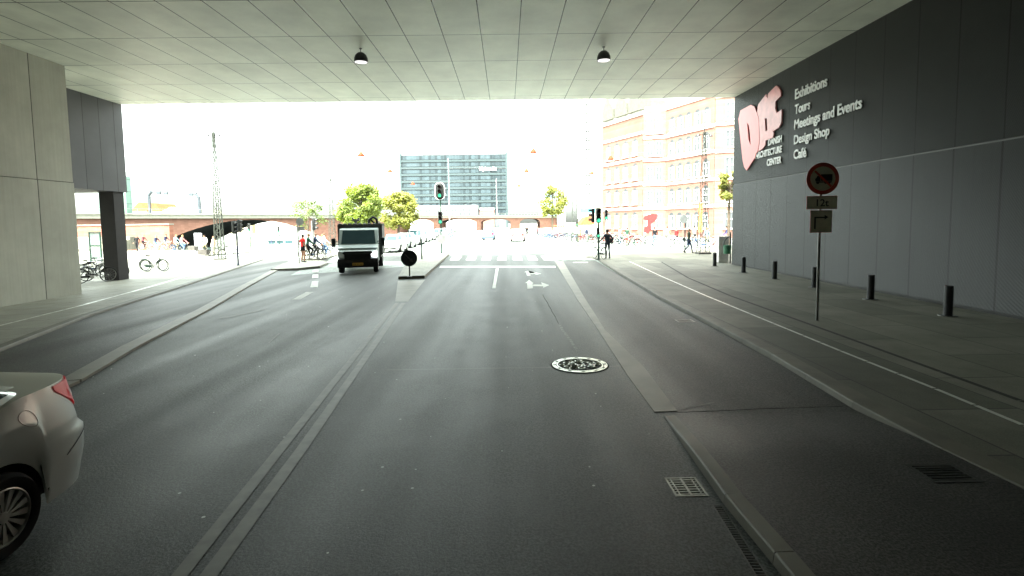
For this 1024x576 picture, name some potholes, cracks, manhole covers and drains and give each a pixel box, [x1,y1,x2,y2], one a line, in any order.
drain grate [905,464,985,483]
manhole cover [551,357,609,374]
drain grate [712,504,768,576]
drain grate [665,477,709,497]
